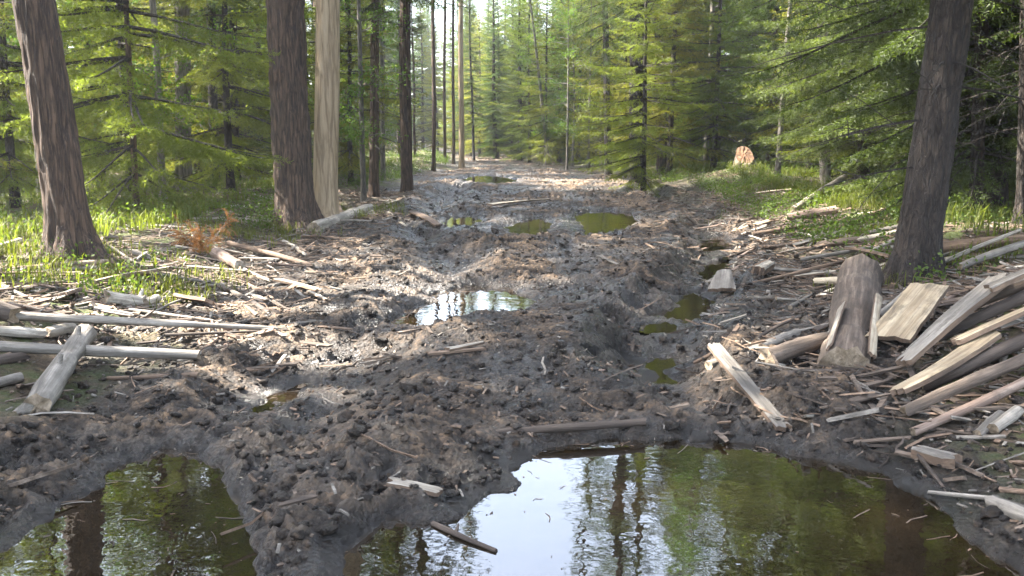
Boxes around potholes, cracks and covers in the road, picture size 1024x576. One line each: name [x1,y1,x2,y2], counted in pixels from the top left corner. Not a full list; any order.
pothole [636,284,728,334]
pothole [0,419,279,576]
pothole [556,206,643,236]
pothole [368,273,539,327]
pothole [632,325,685,339]
pothole [287,424,1024,576]
pothole [497,213,558,235]
